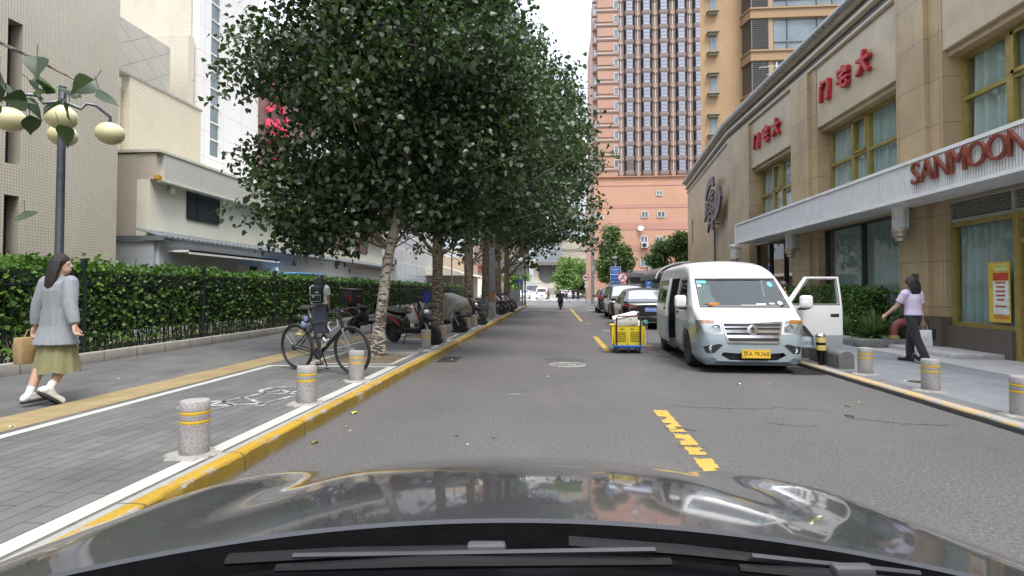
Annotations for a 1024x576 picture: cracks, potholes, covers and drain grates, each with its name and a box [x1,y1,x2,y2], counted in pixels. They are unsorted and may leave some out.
crack [686,406,956,427]
